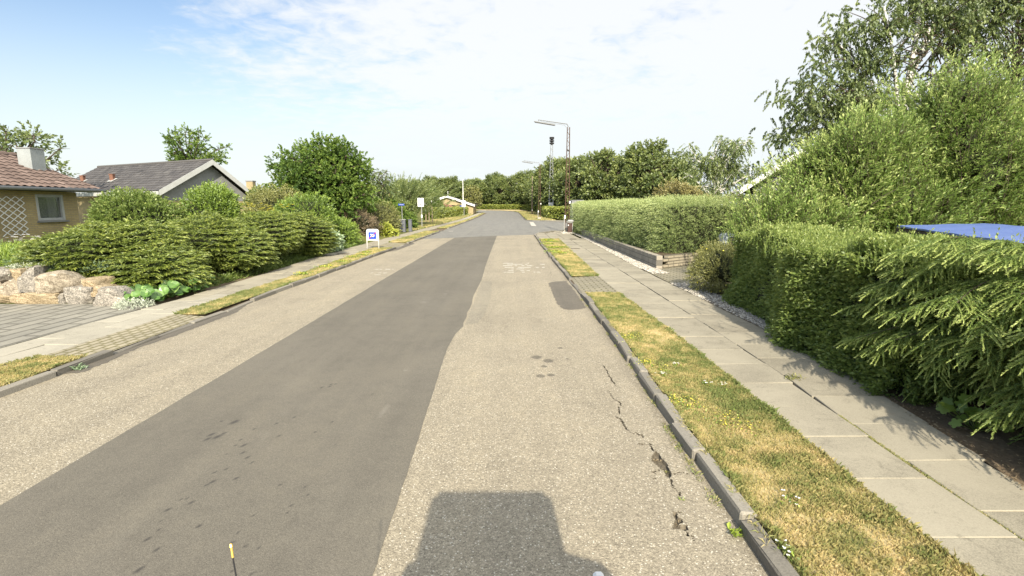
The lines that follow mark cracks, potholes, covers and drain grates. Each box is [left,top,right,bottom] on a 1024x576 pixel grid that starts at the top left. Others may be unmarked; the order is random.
crack [603,366,644,438]
pothole [639,443,694,499]
pothole [672,511,695,541]
